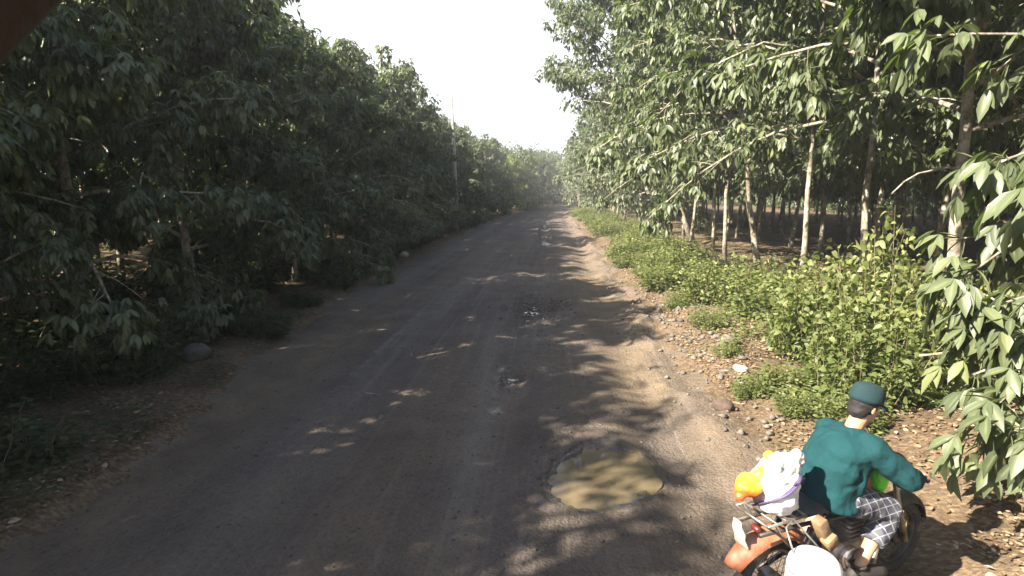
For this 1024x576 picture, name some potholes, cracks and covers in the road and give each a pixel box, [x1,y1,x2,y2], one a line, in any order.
pothole [491,365,535,402]
pothole [523,427,677,527]
pothole [498,289,581,333]
